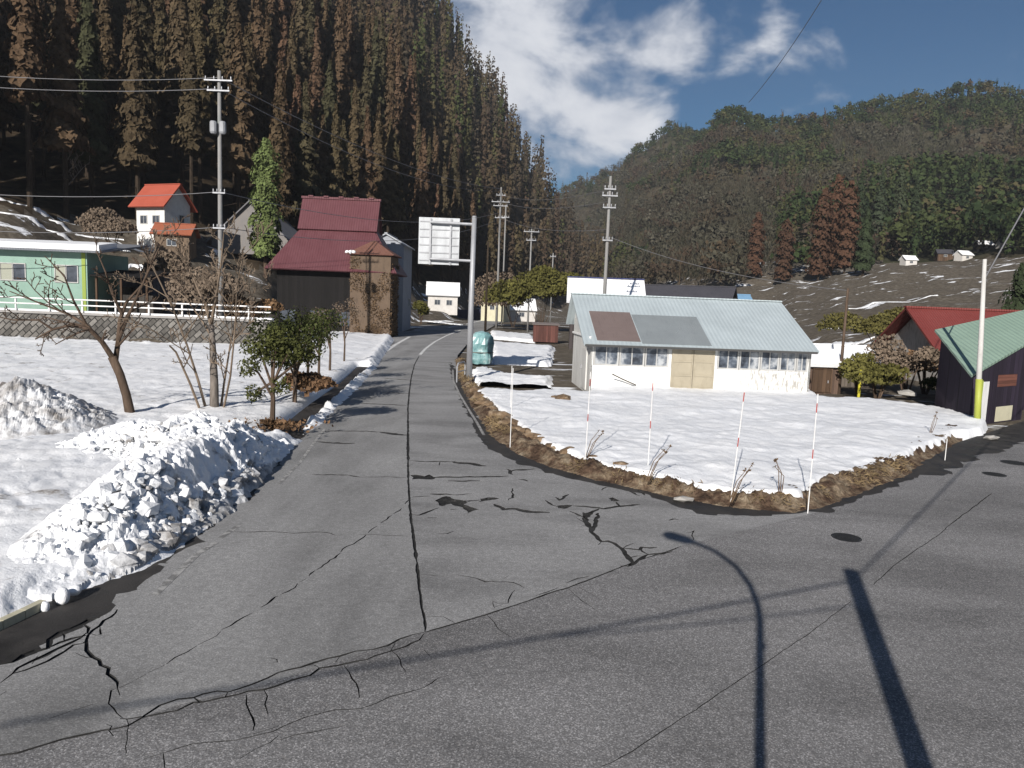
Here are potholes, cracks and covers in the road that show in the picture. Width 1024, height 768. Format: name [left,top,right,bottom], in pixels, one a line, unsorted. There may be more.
manhole cover [831,533,862,542]
crack [0,461,695,768]
pothole [435,496,479,513]
